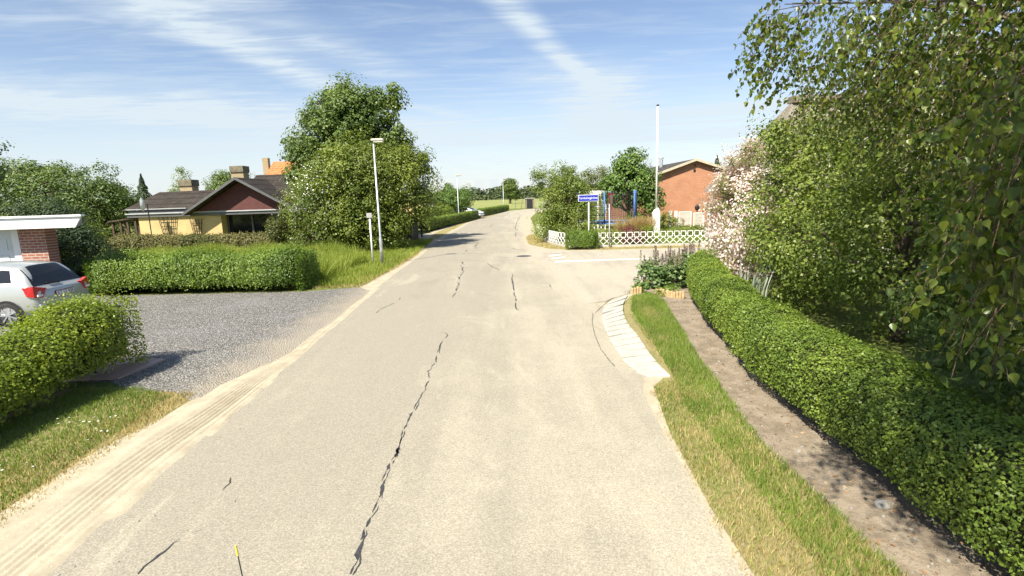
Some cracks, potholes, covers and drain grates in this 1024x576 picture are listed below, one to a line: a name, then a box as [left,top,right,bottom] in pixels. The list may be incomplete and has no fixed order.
crack [452,225,518,310]
crack [138,529,201,574]
